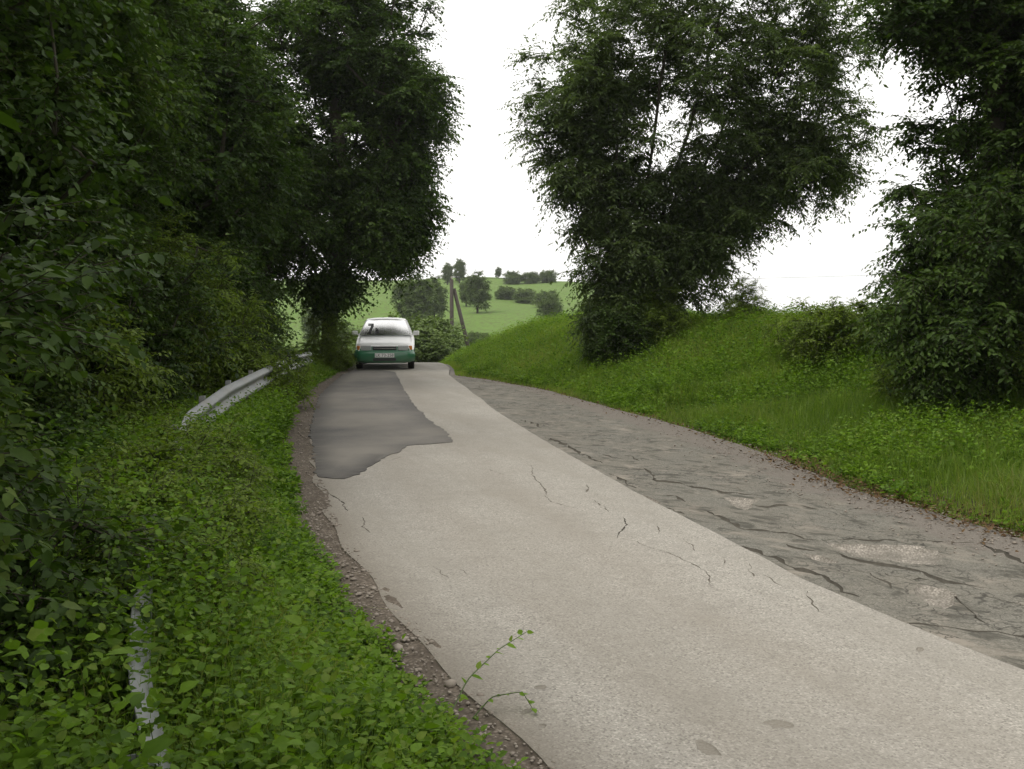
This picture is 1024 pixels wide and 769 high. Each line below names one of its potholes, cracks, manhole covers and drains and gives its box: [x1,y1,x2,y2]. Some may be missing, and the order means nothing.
pothole [725,497,759,510]
crack [521,420,815,582]
pothole [827,543,946,565]
crack [786,538,1024,638]
pothole [914,584,957,609]
